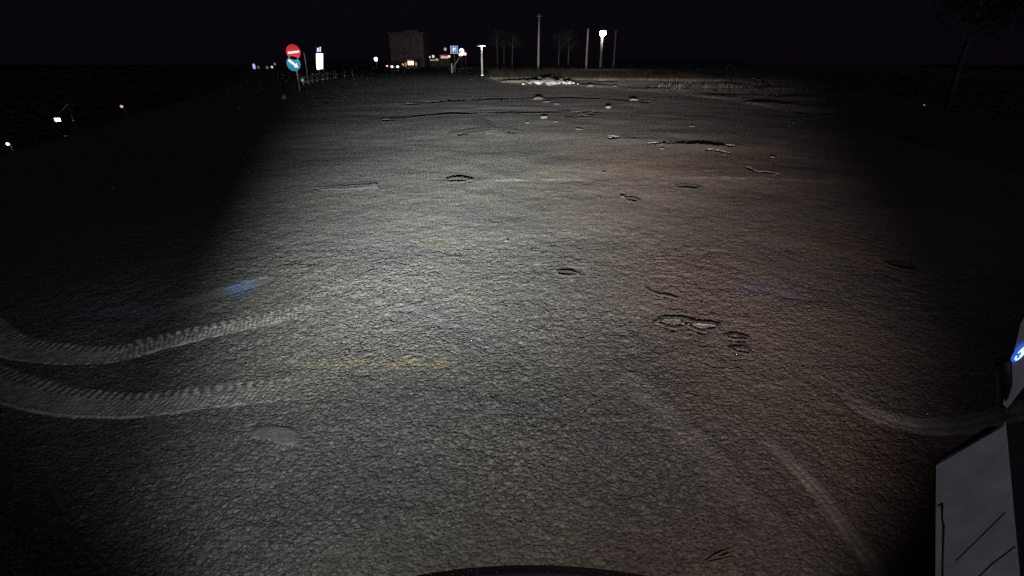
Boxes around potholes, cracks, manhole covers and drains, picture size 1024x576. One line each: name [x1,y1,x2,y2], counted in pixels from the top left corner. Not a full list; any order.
pothole [444,176,473,184]
pothole [728,346,753,356]
pothole [883,261,919,272]
pothole [674,183,703,191]
pothole [554,270,580,278]
crack [382,97,650,135]
pothole [686,321,722,334]
pothole [724,333,750,342]
pothole [653,316,688,330]
crack [645,288,696,324]
